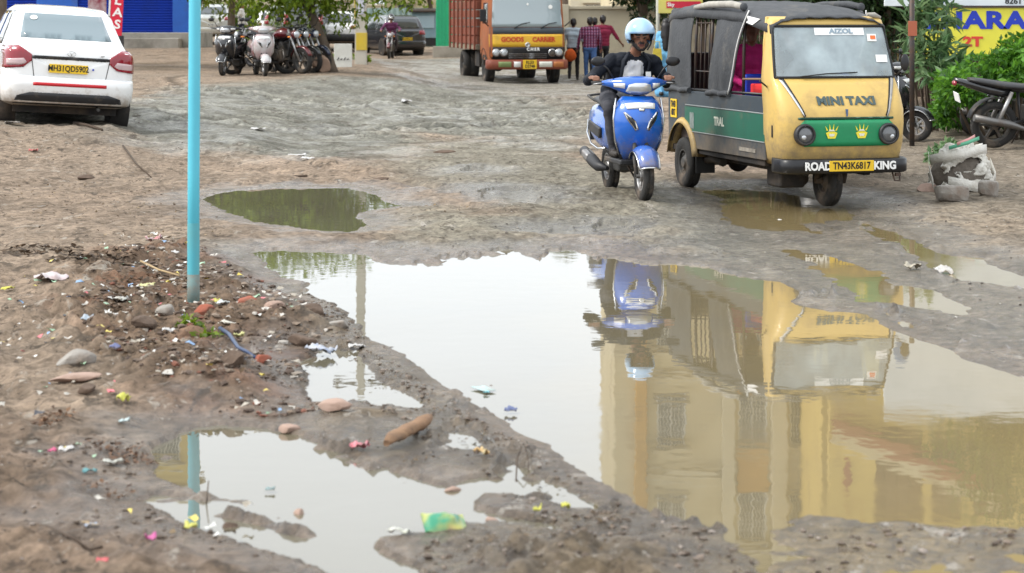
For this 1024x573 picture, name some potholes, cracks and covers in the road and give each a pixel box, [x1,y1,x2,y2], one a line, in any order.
pothole [231,243,1024,573]
pothole [106,411,624,573]
pothole [186,184,415,233]
